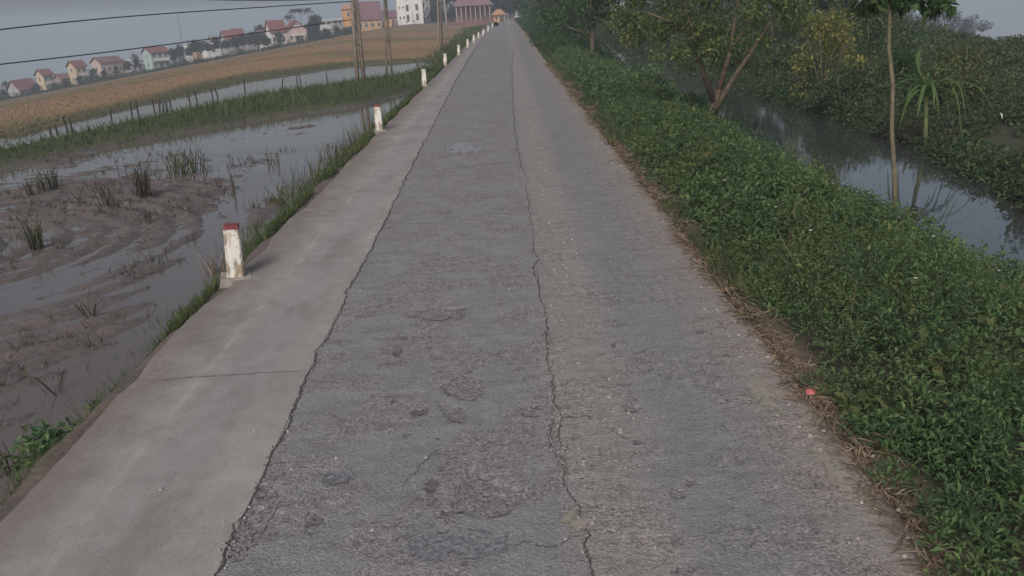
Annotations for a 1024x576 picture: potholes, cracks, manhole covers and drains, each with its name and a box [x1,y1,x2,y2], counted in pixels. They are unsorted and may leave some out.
crack [159,27,507,576]
crack [511,52,614,576]
pothole [443,408,467,423]
pothole [669,487,687,498]
pothole [318,469,355,486]
